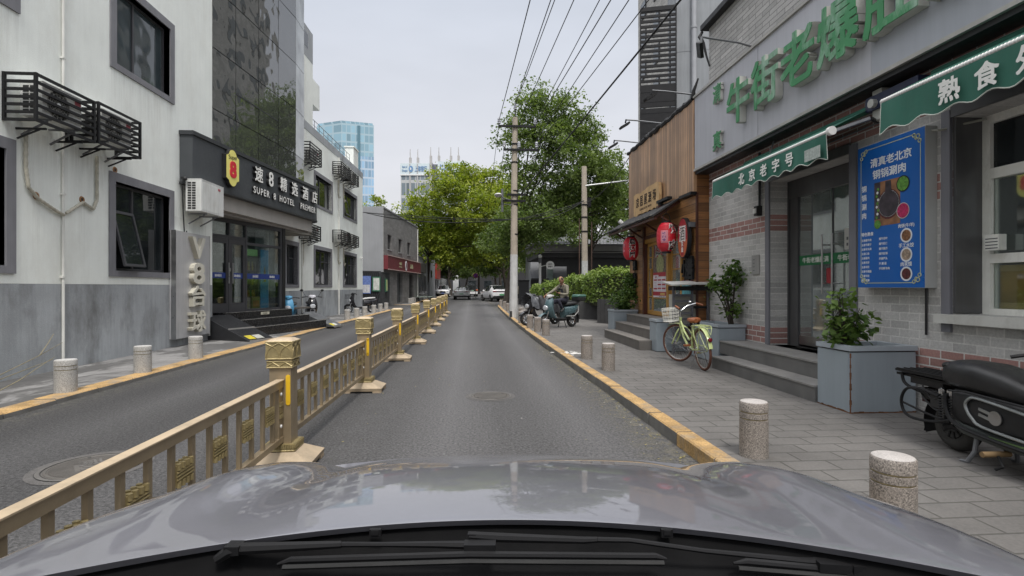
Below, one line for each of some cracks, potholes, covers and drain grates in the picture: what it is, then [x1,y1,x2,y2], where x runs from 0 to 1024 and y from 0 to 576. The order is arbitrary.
manhole cover [465,391,515,401]
manhole cover [22,450,155,485]
